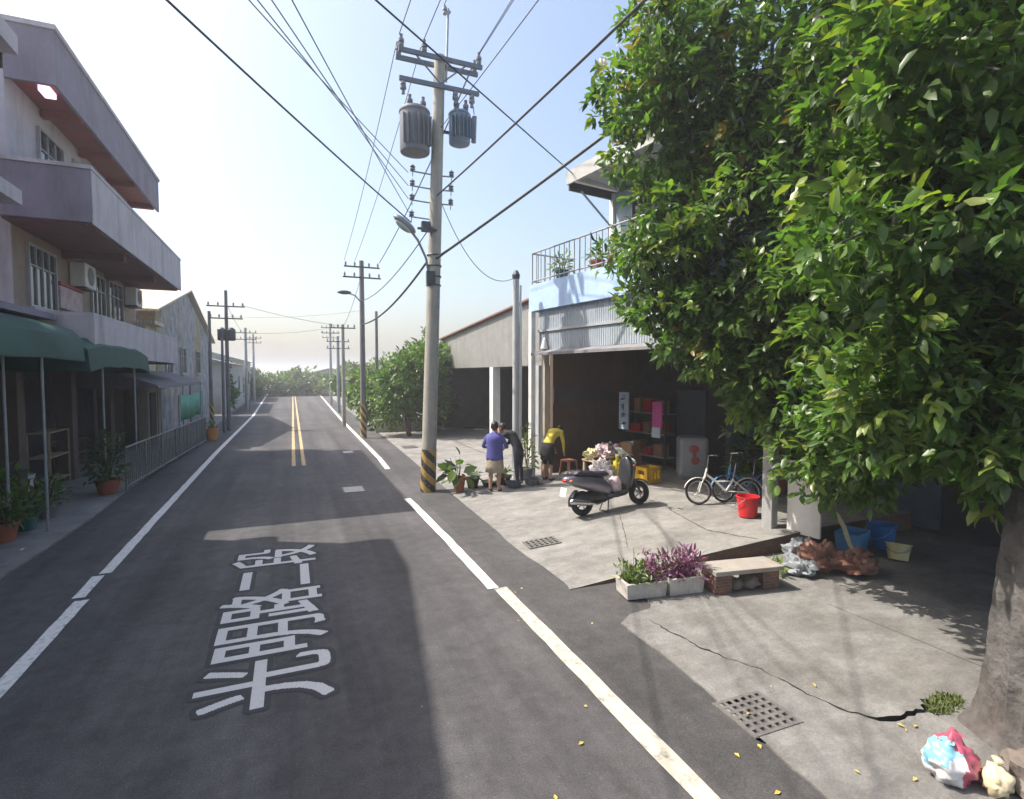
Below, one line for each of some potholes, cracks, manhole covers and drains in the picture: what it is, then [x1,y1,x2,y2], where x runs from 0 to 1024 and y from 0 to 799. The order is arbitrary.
drain grate [522,536,562,549]
drain grate [713,690,803,740]
crack [647,618,940,722]
